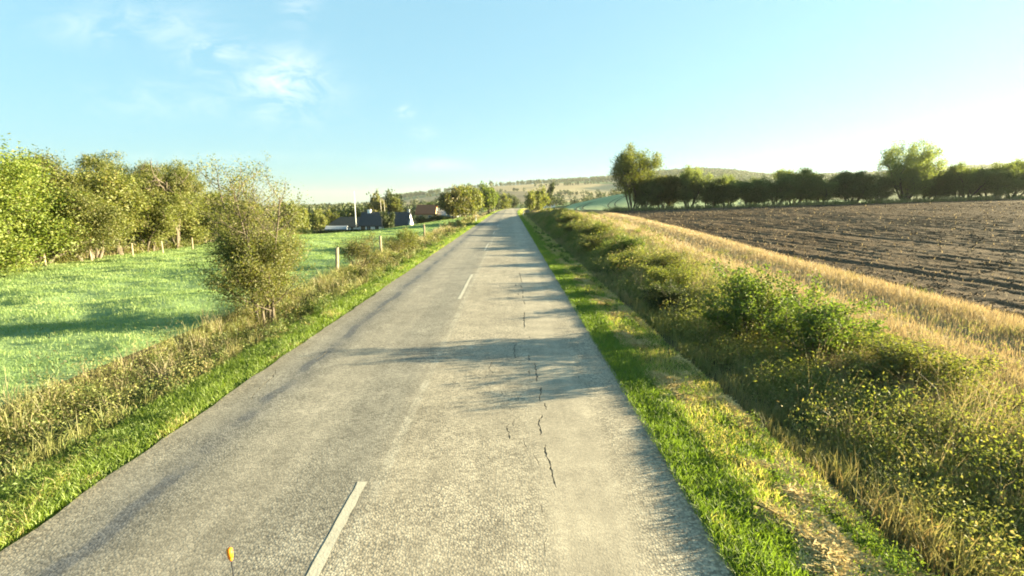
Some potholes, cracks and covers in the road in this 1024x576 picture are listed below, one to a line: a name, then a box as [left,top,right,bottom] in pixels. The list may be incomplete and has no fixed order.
crack [506,273,557,488]
